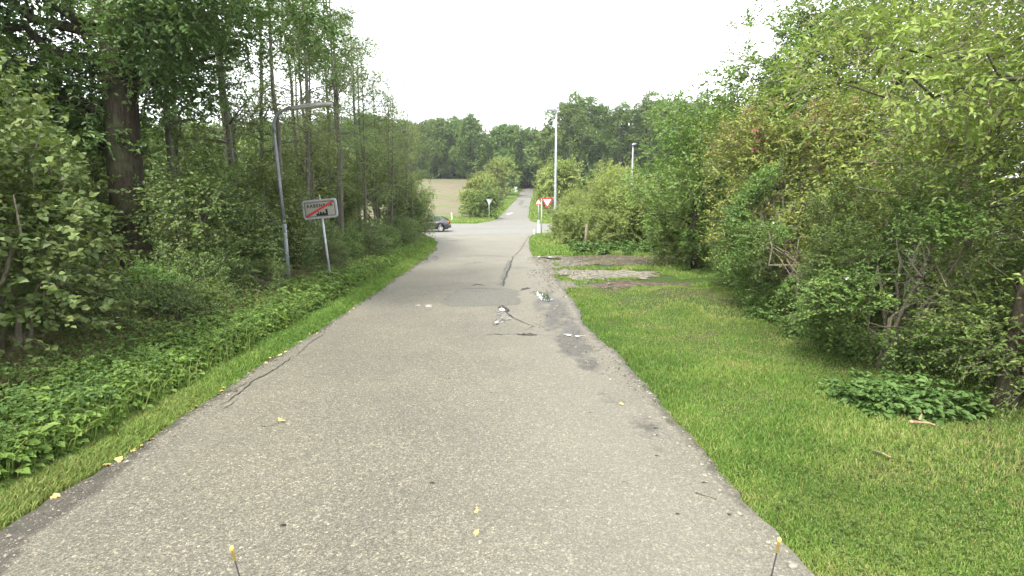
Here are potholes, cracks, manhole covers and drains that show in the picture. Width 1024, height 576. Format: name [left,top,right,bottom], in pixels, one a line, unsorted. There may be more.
crack [215,333,325,408]
